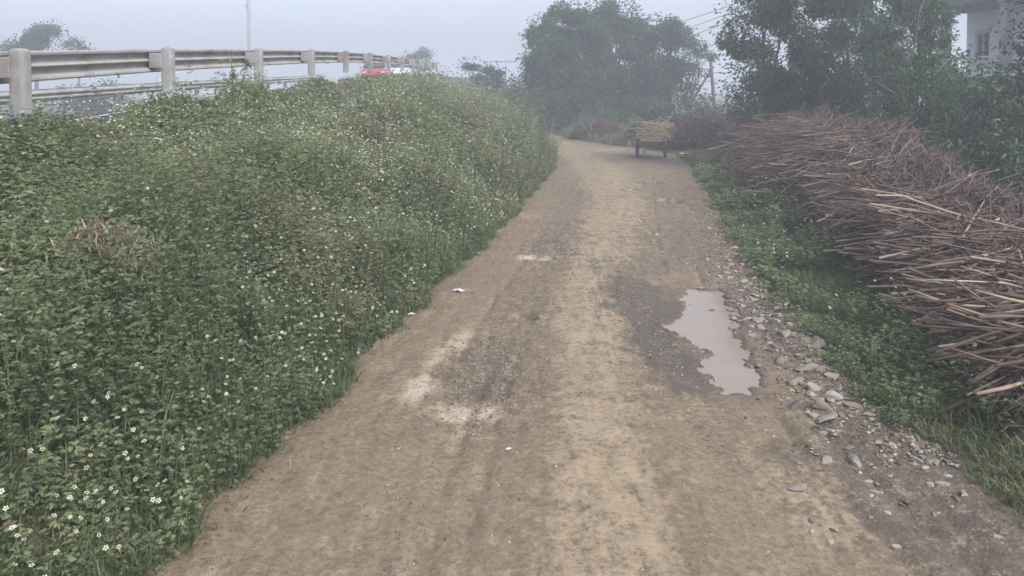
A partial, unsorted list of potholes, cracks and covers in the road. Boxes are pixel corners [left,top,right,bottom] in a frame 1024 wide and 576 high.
pothole [649,287,774,403]
